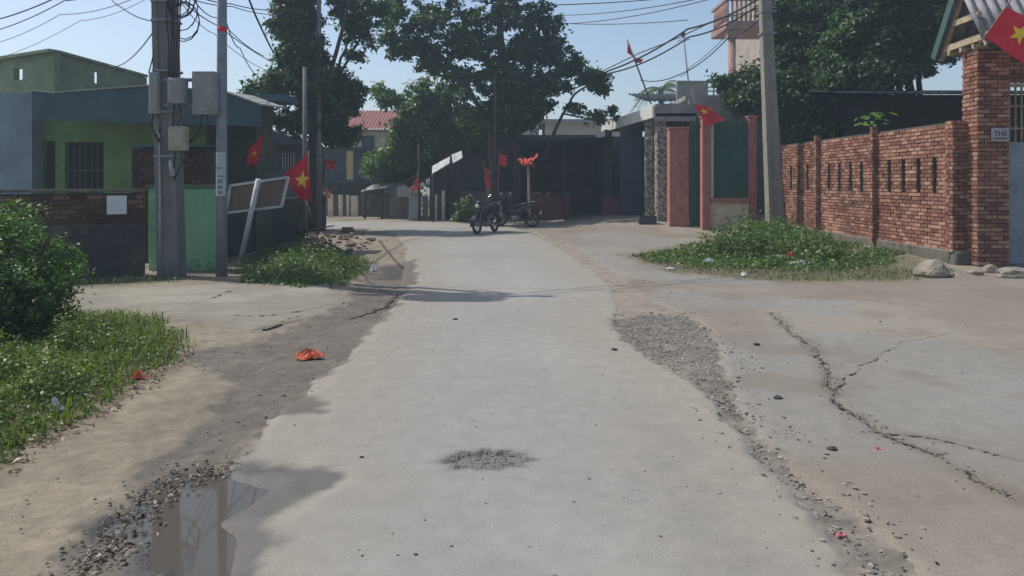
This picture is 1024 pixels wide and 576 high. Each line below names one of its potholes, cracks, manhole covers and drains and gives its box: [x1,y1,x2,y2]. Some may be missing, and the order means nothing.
crack [163,291,400,331]
pothole [438,448,540,471]
crack [765,312,1021,500]
